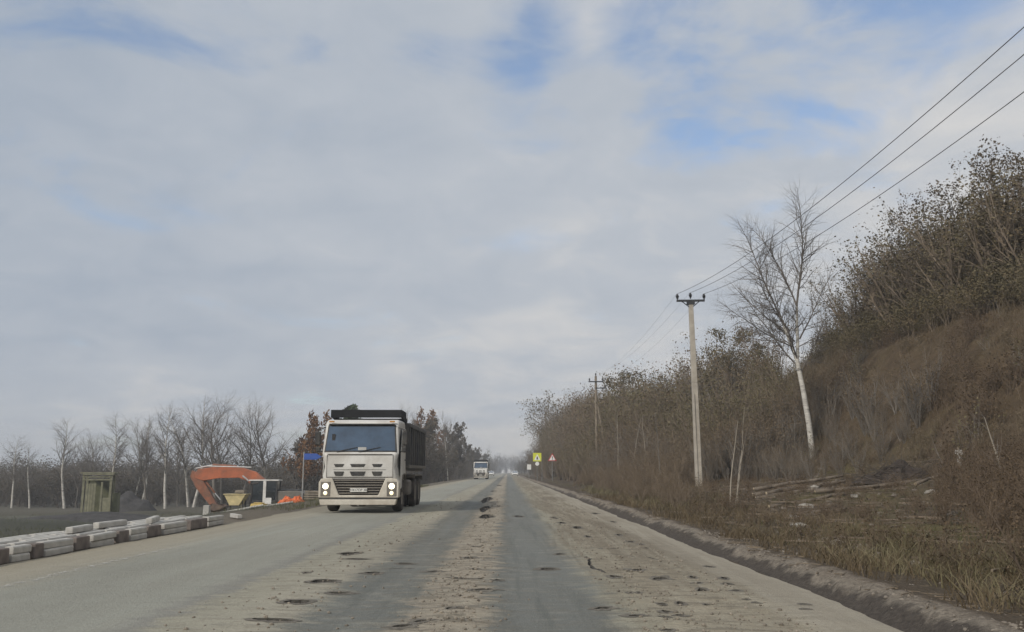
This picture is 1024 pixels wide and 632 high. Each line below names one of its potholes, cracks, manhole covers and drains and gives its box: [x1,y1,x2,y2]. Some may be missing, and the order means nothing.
crack [581,554,663,573]
